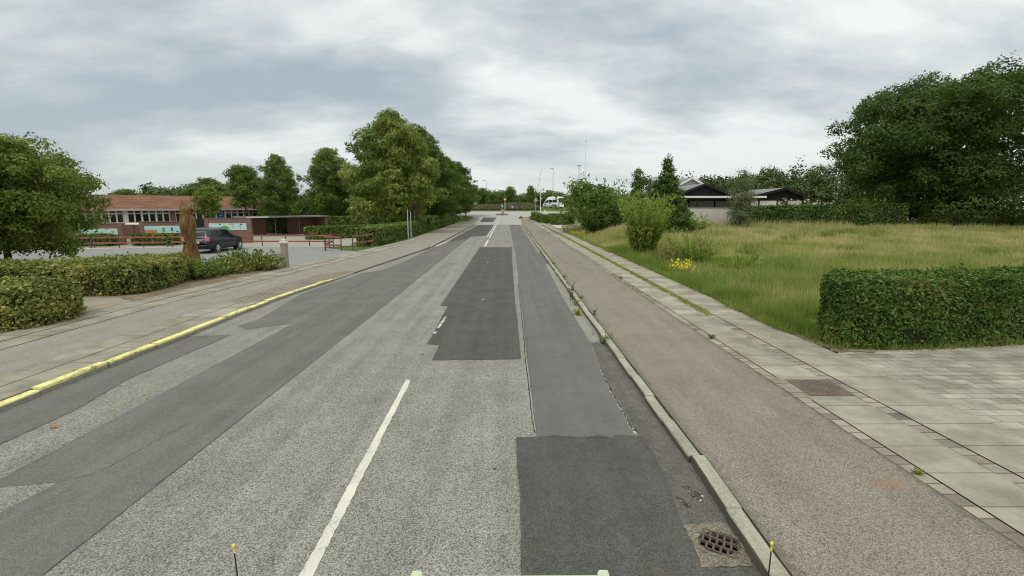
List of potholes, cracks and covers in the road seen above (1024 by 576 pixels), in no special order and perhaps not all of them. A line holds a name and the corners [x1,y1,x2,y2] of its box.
manhole cover [786,379,856,396]
drain grate [693,528,745,559]
crack [597,364,638,434]
